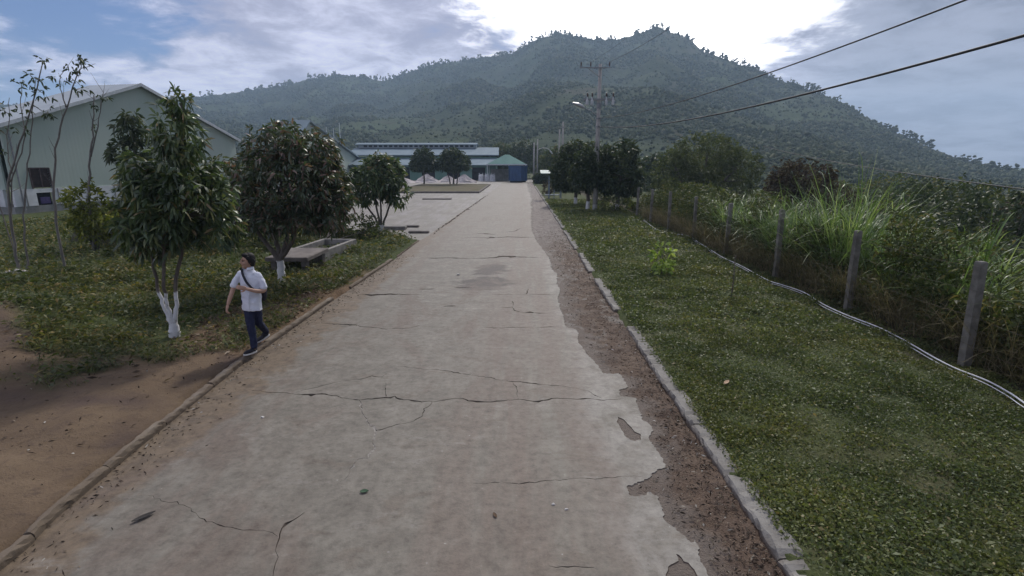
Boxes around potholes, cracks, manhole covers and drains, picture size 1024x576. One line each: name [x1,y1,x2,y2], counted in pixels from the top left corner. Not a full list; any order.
crack [248,366,631,478]
crack [149,495,302,574]
crack [477,476,641,484]
